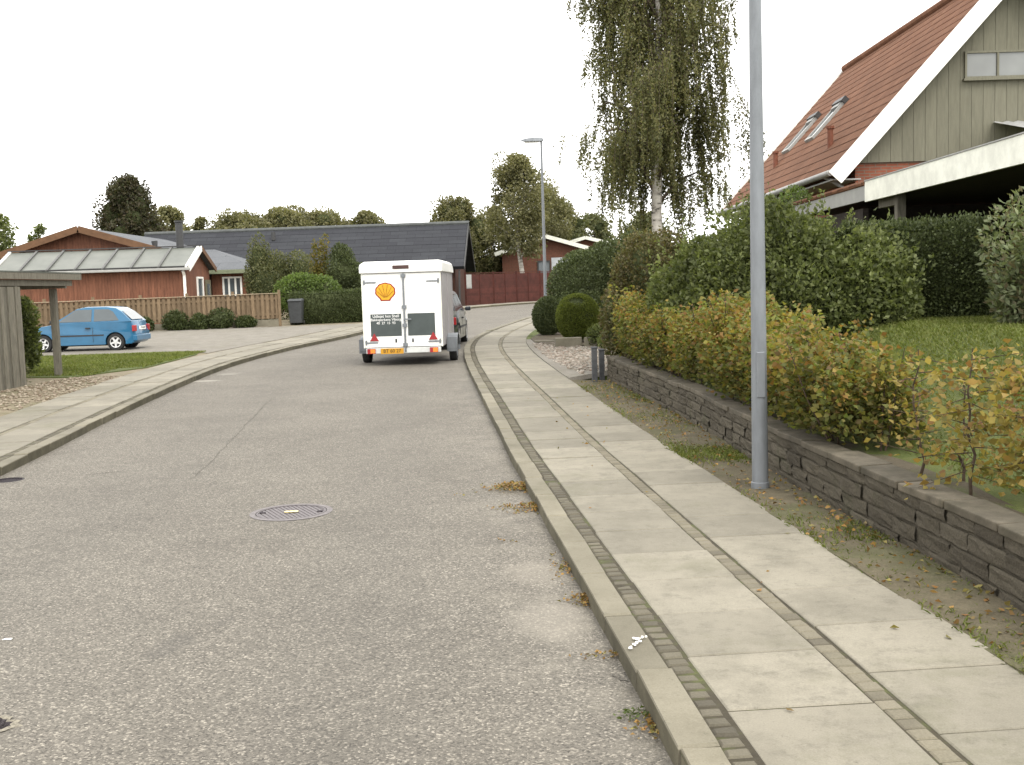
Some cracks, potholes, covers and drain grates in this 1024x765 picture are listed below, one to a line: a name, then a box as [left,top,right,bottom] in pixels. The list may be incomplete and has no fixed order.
manhole cover [249,504,333,521]
